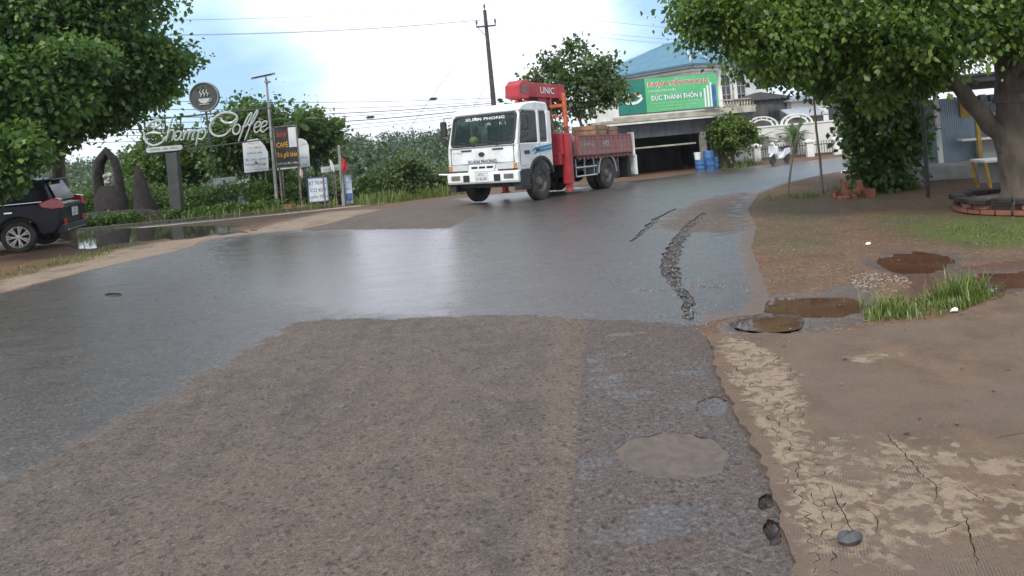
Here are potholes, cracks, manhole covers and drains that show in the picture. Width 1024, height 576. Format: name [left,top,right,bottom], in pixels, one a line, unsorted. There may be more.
pothole [763,519,782,547]
crack [598,208,799,333]
crack [725,339,878,574]
pothole [758,494,774,510]
crack [889,437,990,563]
